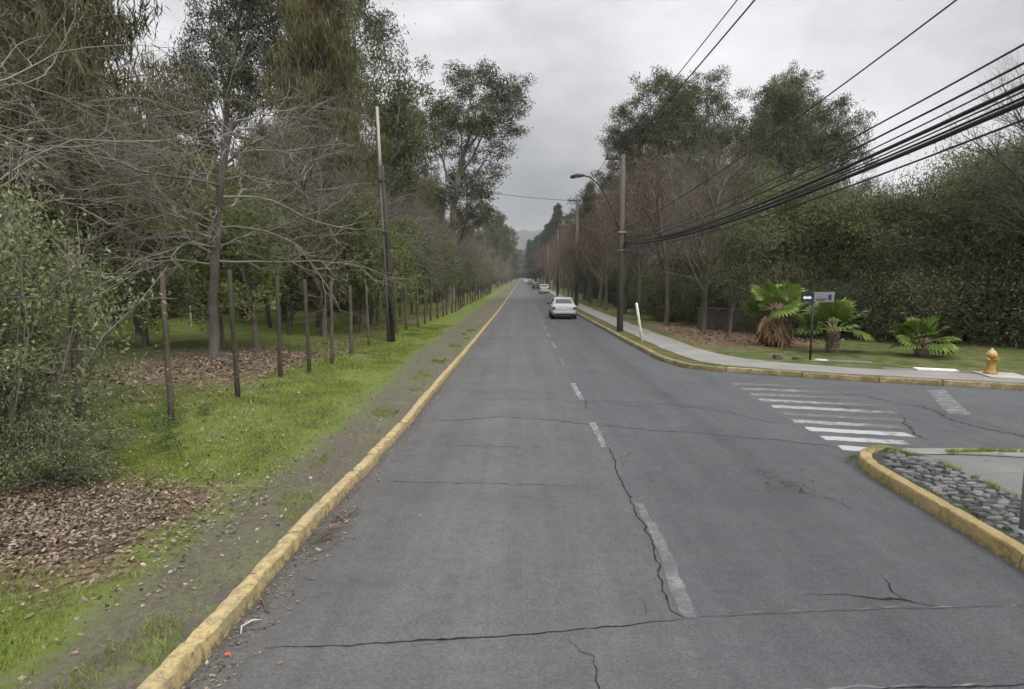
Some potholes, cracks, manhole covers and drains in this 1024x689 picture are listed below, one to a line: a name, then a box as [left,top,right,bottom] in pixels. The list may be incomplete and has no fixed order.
crack [262,398,827,689]
crack [802,573,933,606]
